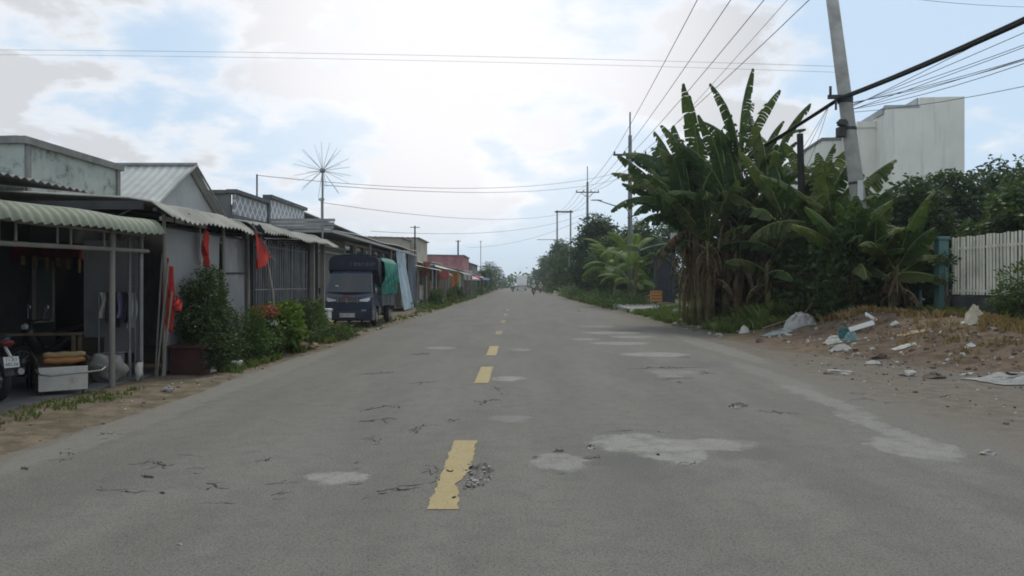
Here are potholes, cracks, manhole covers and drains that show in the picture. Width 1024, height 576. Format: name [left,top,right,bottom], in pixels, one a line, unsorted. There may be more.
crack [348,405,460,500]
pothole [462,463,495,490]
crack [130,454,236,504]
crack [96,486,153,494]
